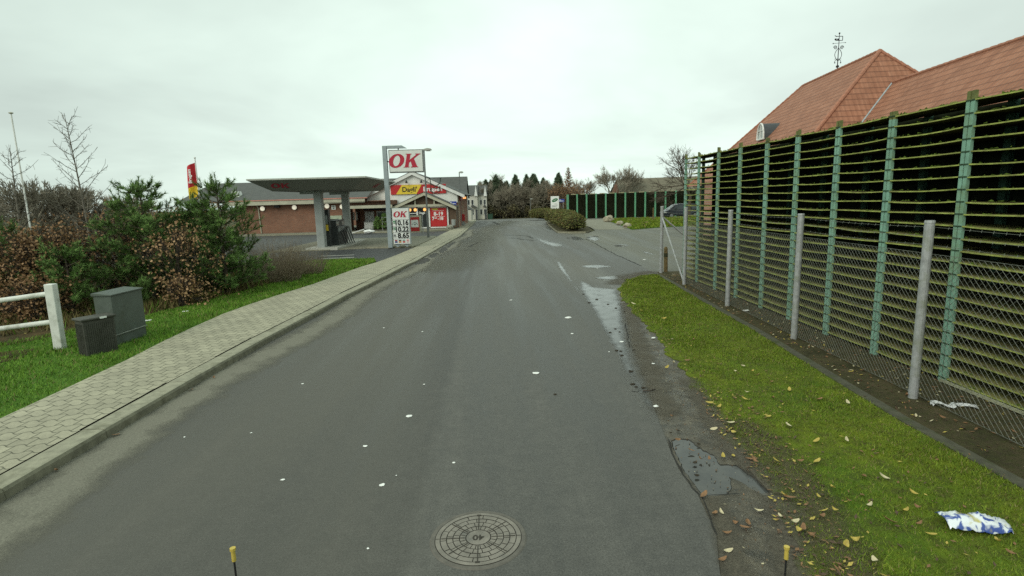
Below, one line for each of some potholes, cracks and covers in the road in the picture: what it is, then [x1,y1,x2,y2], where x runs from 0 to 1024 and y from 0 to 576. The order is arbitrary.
pothole [671,438,770,496]
manhole cover [430,511,527,570]
